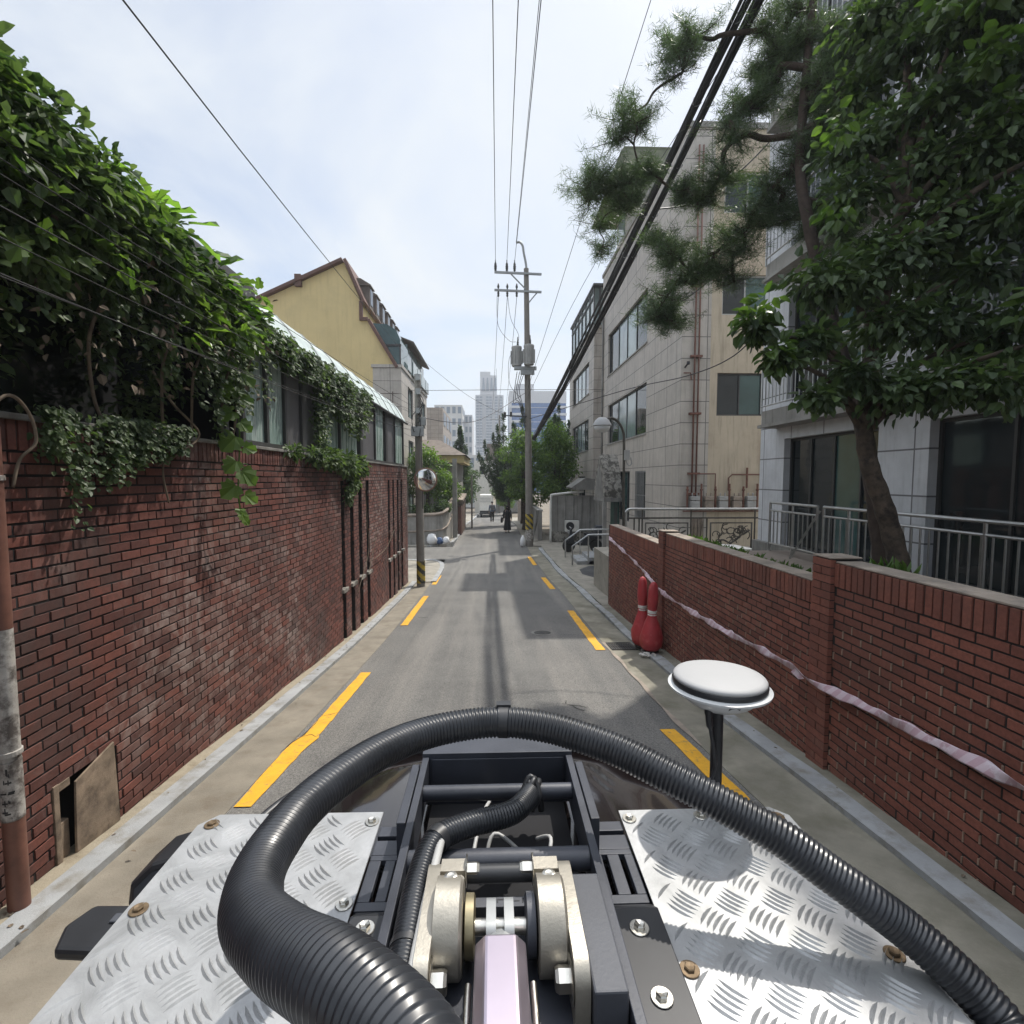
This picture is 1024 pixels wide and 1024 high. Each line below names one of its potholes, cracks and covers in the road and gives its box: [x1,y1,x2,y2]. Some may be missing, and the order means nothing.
drain grate [606,642,638,650]
